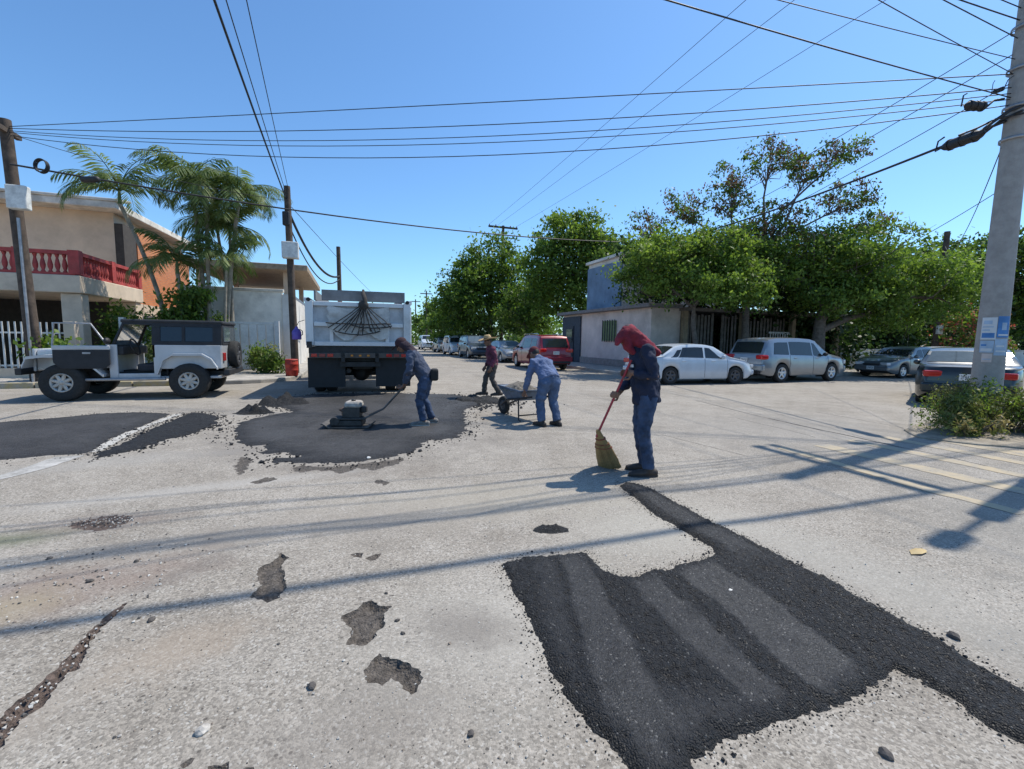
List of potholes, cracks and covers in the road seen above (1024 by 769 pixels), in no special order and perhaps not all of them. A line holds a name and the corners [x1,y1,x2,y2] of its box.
pothole [233,457,254,475]
pothole [250,553,289,603]
pothole [341,600,392,646]
pothole [363,653,424,695]
pothole [70,514,134,532]
